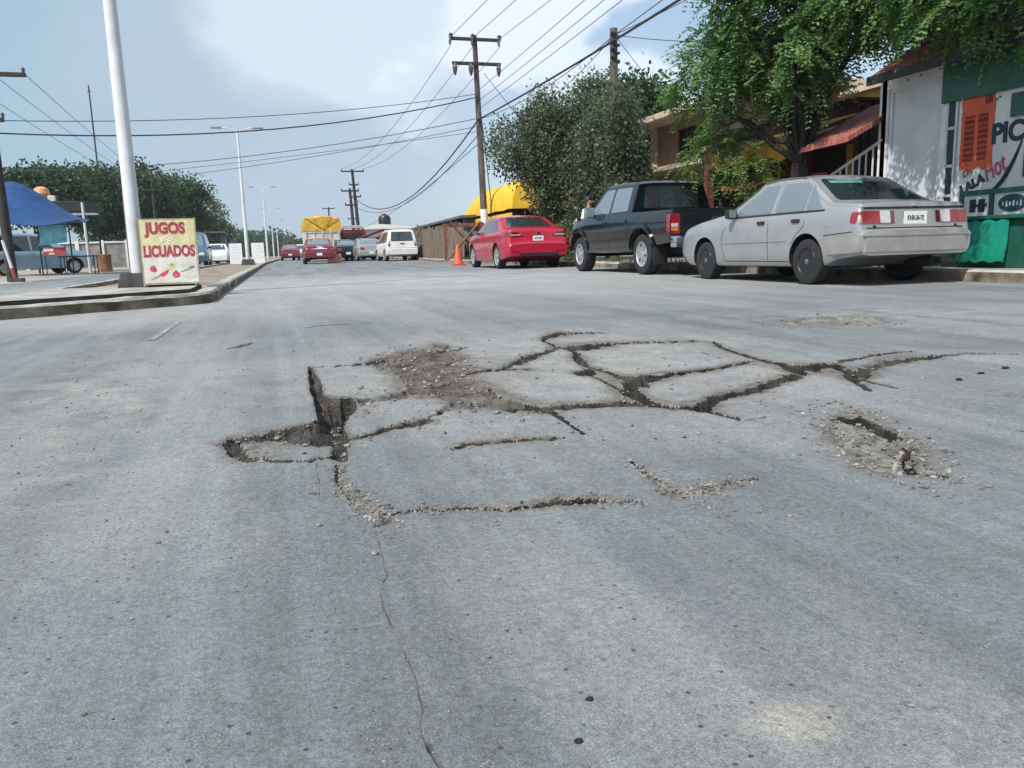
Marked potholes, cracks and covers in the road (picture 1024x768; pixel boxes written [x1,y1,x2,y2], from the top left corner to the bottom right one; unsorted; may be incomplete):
pothole [831,408,948,478]
crack [308,461,739,768]
pothole [222,367,357,463]
